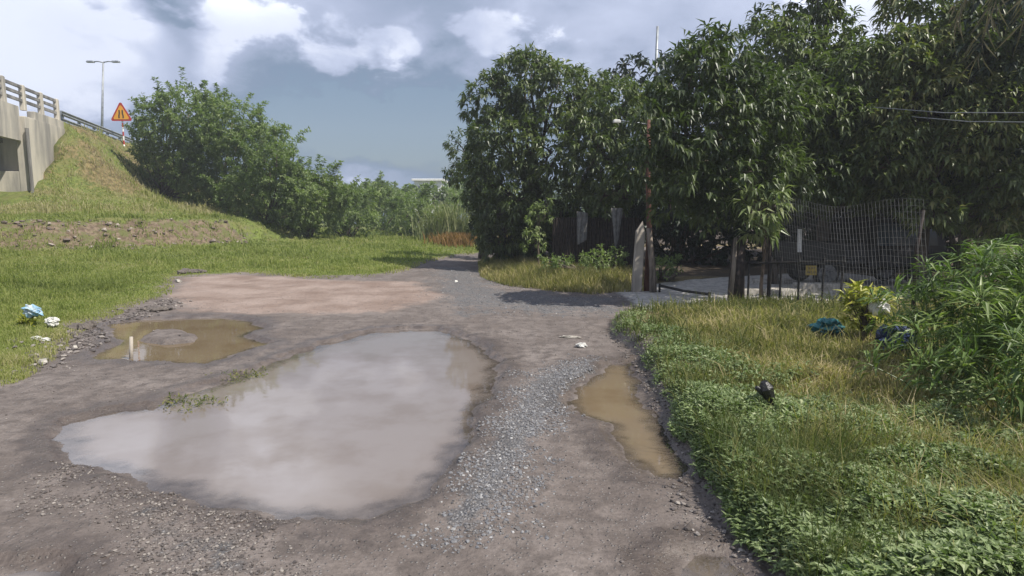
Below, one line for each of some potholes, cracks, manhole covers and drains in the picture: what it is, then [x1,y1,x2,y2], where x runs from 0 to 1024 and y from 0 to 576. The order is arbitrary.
pothole [30,325,514,531]
pothole [79,313,281,365]
pothole [557,354,701,481]
